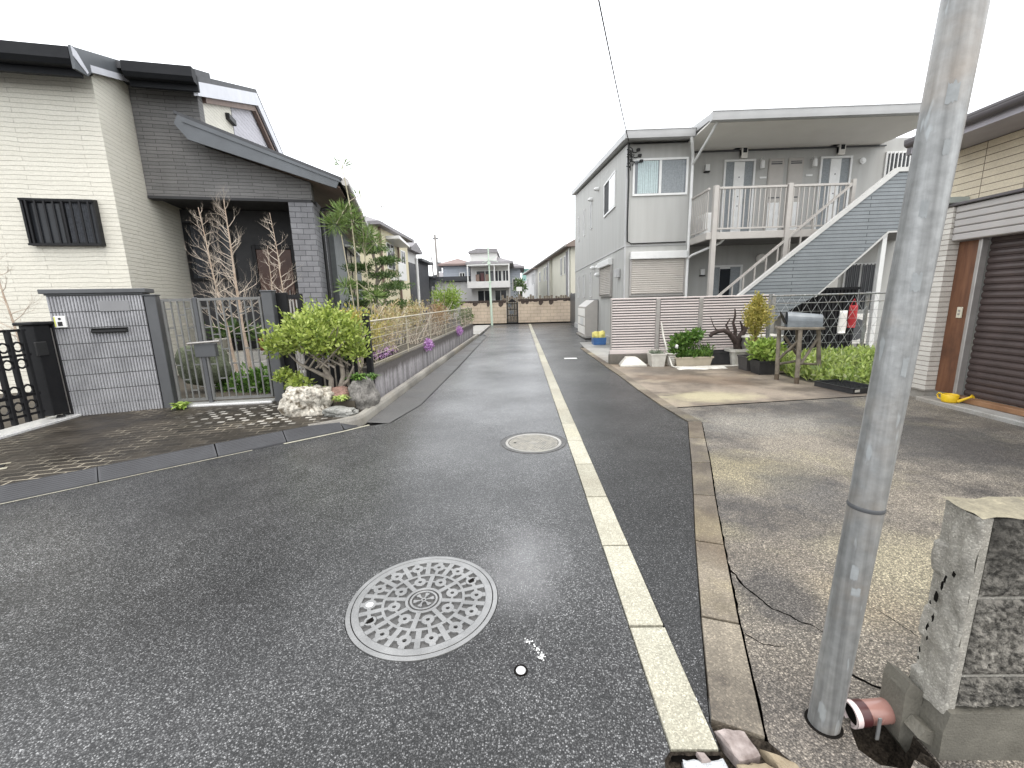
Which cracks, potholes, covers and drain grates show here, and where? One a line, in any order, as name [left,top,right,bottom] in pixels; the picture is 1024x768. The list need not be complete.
manhole cover [345,556,498,662]
crack [852,674,881,689]
manhole cover [500,433,567,454]
crack [728,568,823,648]
